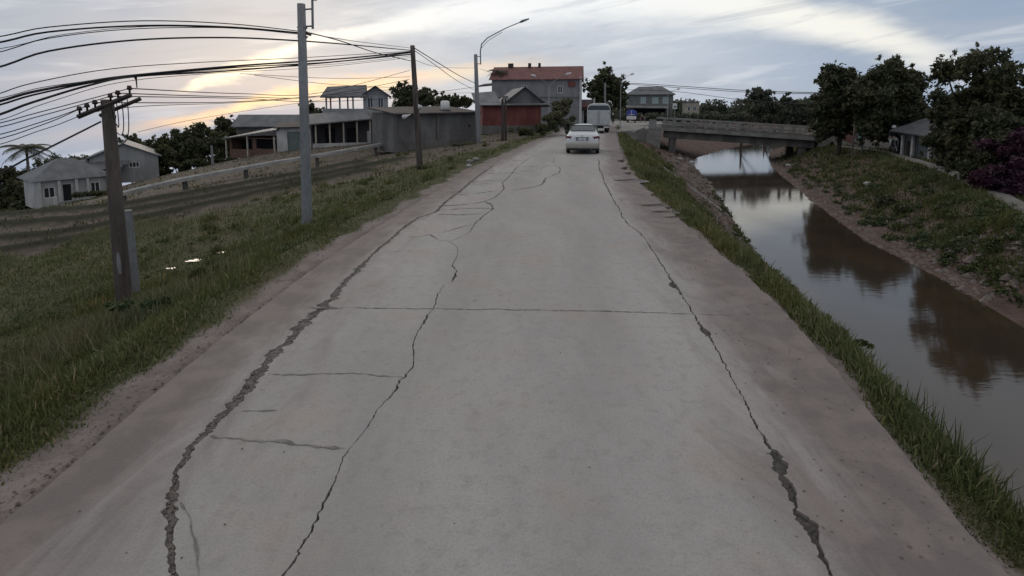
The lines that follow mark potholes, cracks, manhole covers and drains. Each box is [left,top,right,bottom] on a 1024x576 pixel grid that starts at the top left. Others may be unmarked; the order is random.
crack [598,159,831,576]
crack [162,160,561,576]
